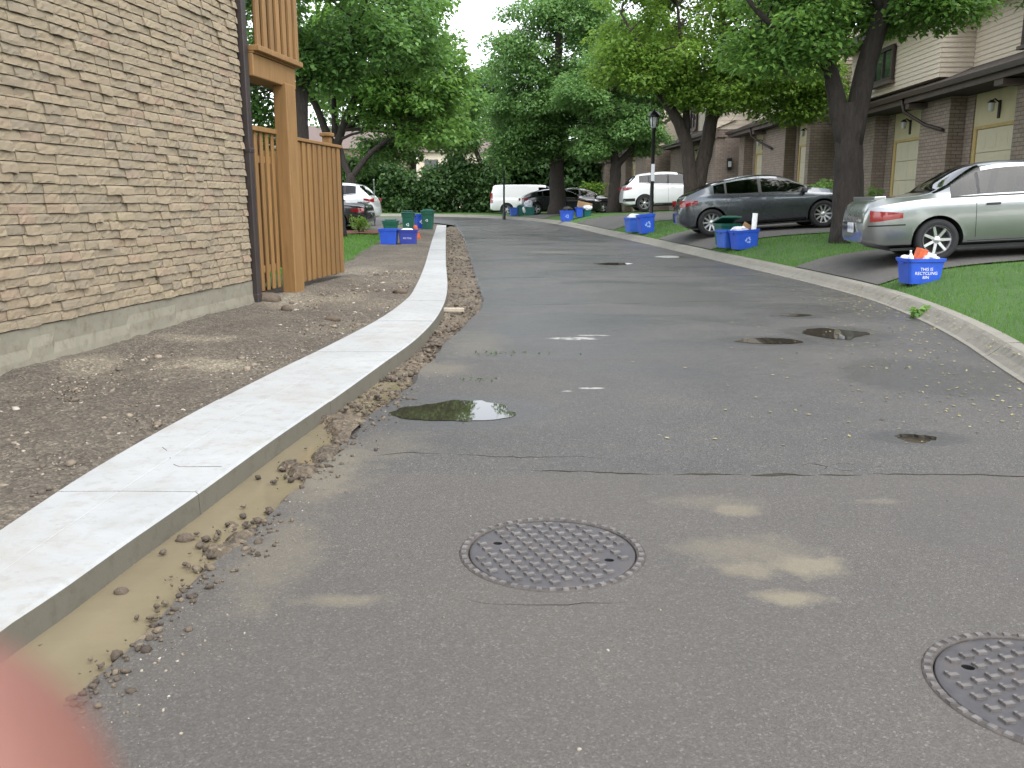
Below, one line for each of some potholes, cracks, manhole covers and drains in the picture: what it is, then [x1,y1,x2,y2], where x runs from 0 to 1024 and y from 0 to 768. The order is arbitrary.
manhole cover [459,517,646,593]
pothole [895,434,937,443]
manhole cover [921,632,1024,745]
